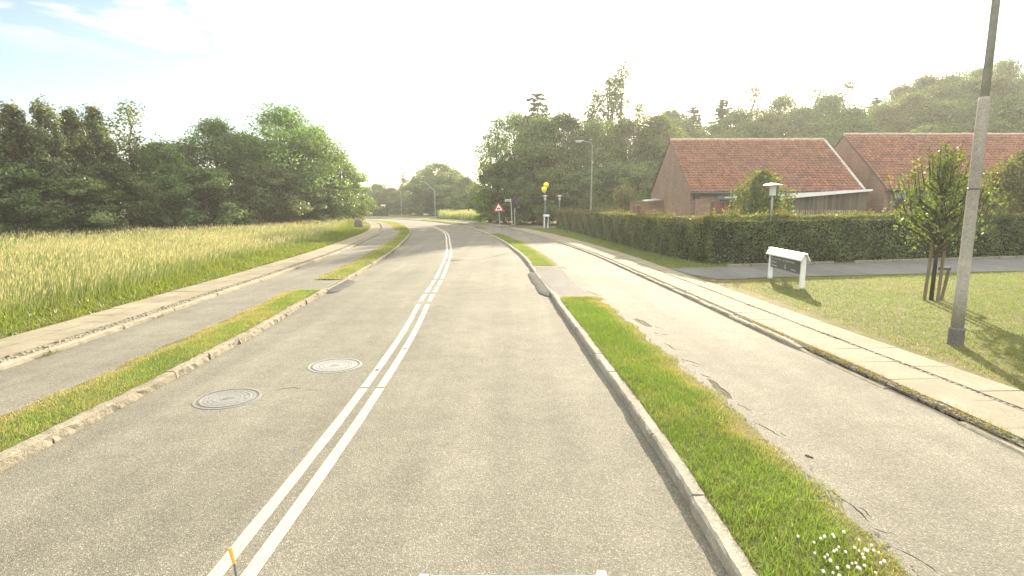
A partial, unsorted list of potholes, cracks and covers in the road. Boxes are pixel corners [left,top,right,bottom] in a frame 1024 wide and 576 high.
crack [830,490,938,574]
manhole cover [192,388,262,410]
manhole cover [307,358,362,373]
